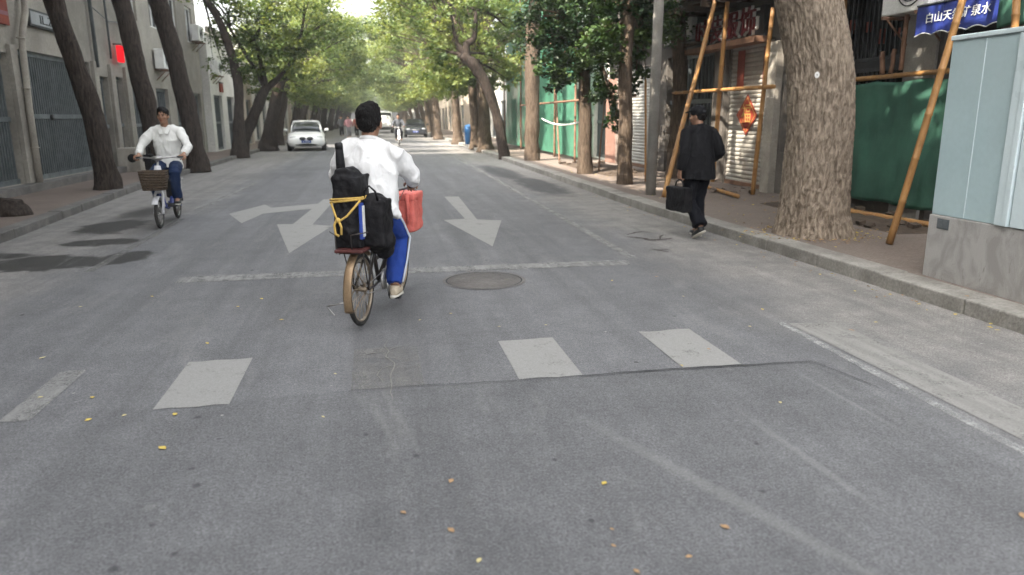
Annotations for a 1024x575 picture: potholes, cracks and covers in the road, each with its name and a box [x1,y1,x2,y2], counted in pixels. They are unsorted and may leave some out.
crack [627,231,672,252]
crack [362,340,414,400]
manhole cover [443,271,525,289]
